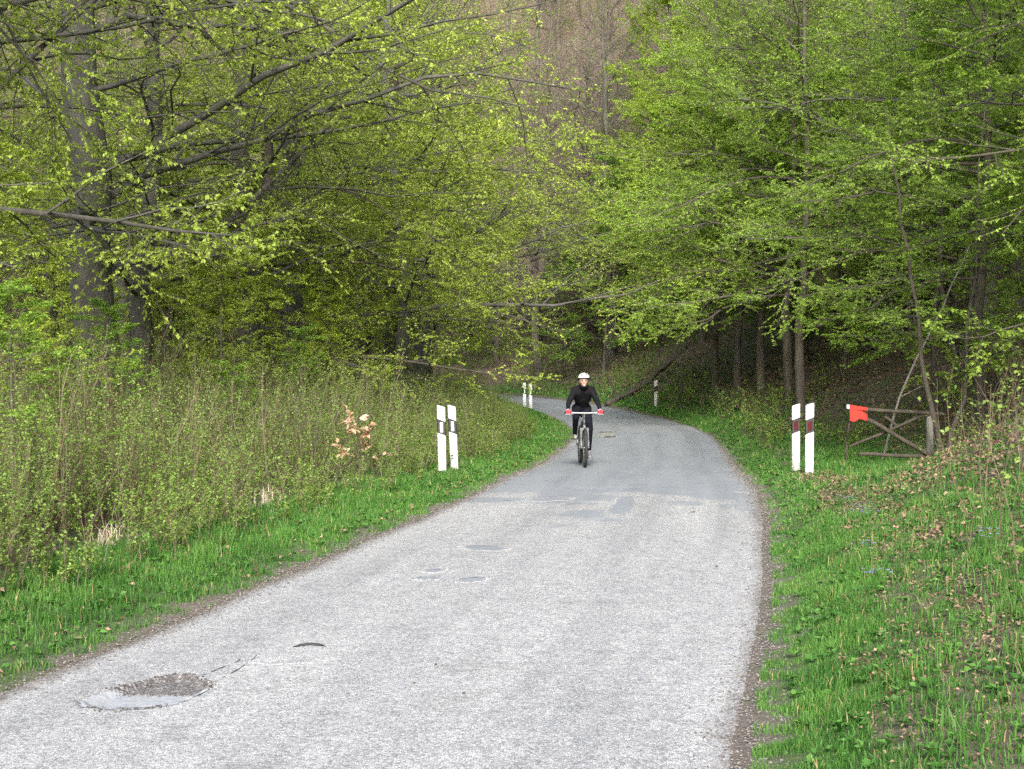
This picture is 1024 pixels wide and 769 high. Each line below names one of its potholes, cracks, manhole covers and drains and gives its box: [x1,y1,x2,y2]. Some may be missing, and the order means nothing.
pothole [80,672,216,712]
